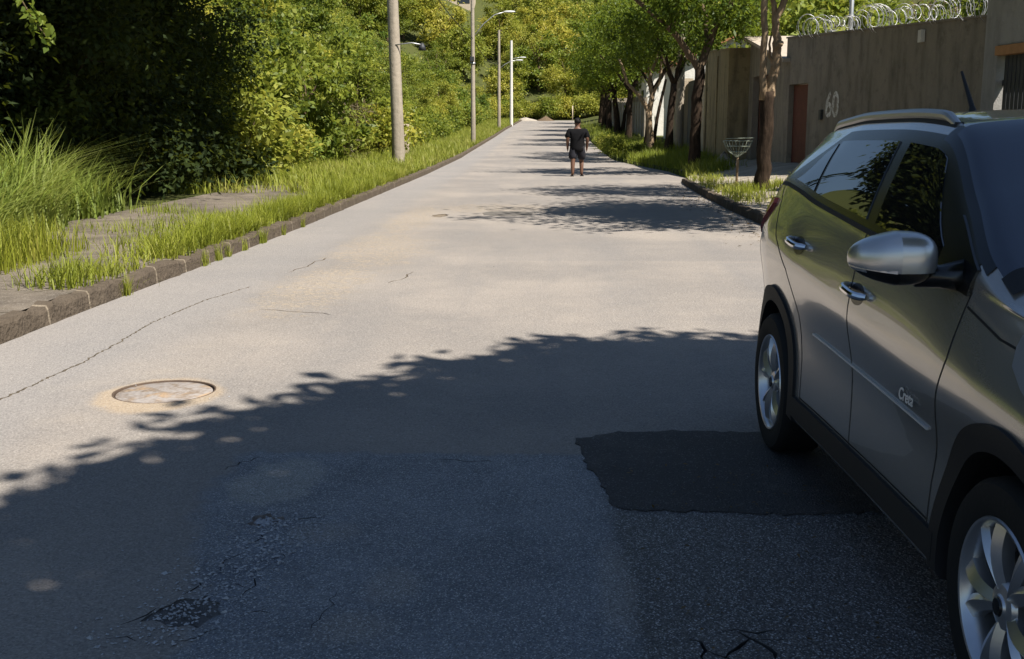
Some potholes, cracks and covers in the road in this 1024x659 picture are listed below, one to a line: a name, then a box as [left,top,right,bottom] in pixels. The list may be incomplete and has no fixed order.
manhole cover [111,380,216,403]
crack [0,287,249,400]
crack [688,629,785,659]
crack [107,535,286,641]
pothole [140,596,221,628]
